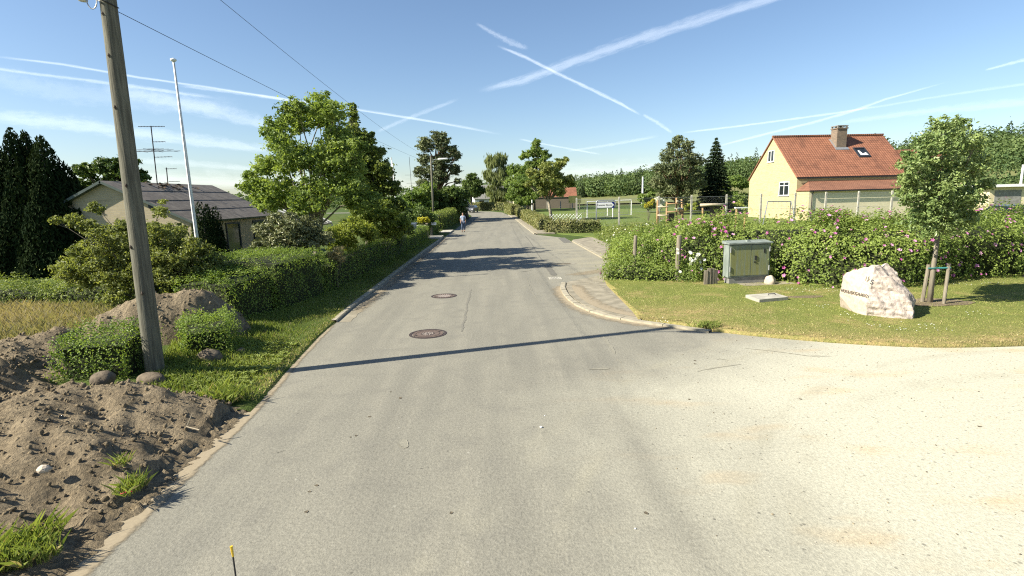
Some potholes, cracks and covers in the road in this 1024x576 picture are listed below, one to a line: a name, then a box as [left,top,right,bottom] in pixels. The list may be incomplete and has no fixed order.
crack [461,289,472,332]
manhole cover [409,329,447,339]
